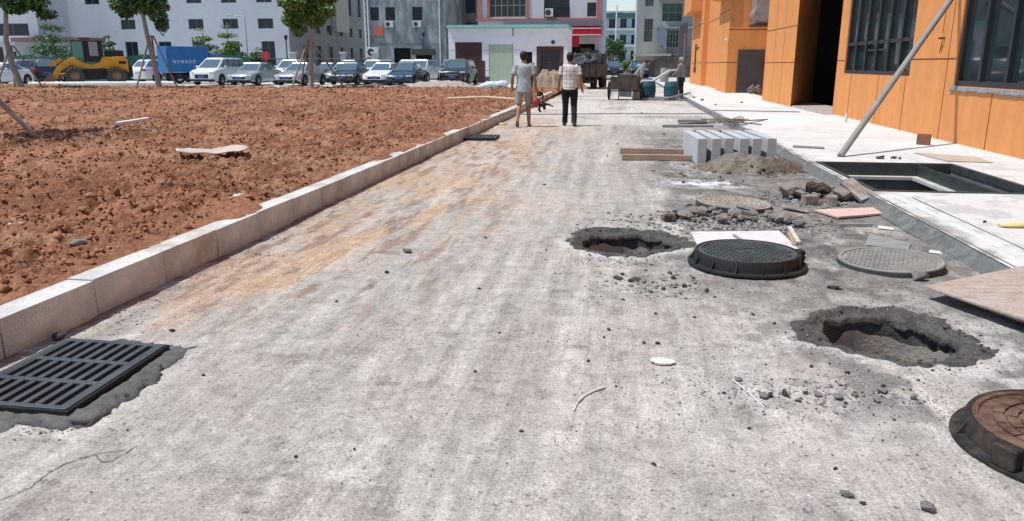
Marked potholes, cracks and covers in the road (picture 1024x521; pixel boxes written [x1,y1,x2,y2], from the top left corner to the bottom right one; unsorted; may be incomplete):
pothole [566,227,696,258]
drain grate [0,338,198,433]
manhole cover [687,239,808,279]
pothole [790,305,998,368]
manhole cover [695,195,772,213]
manhole cover [837,247,946,278]
manhole cover [949,389,1024,483]
crack [0,445,137,500]
